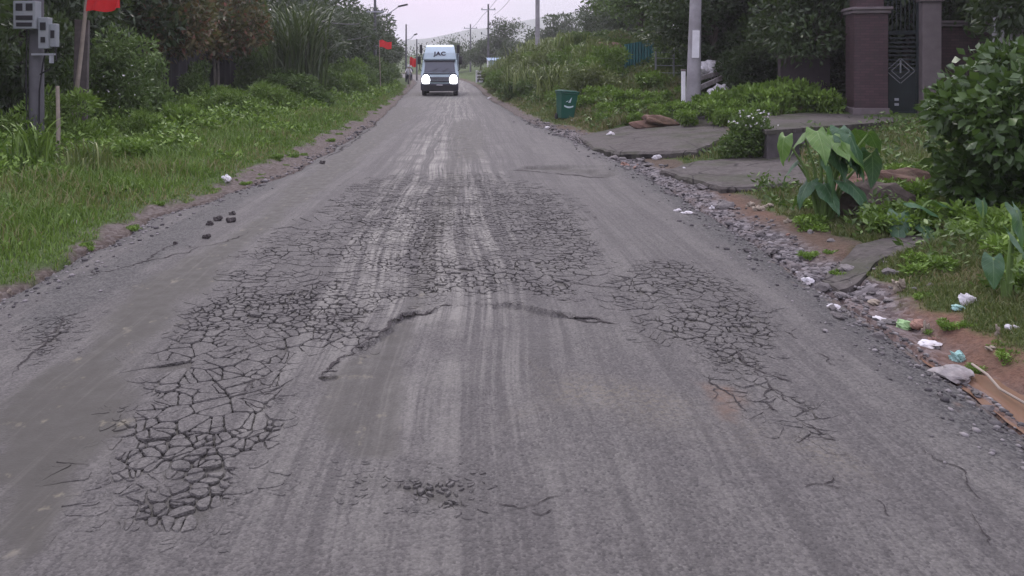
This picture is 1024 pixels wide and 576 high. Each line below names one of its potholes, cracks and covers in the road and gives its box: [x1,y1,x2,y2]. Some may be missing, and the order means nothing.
crack [923,449,991,544]
crack [6,123,851,554]
